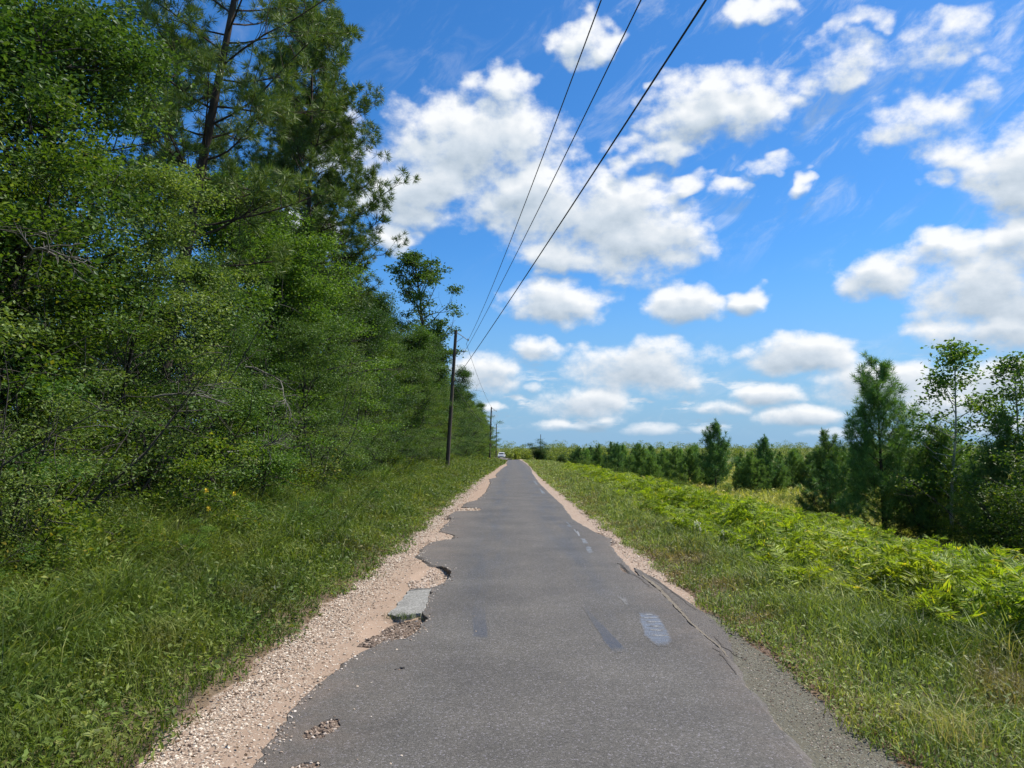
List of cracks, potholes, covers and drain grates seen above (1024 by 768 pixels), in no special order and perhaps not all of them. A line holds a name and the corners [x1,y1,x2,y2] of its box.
pothole [358,618,424,648]
crack [633,574,810,765]
pothole [302,718,340,740]
